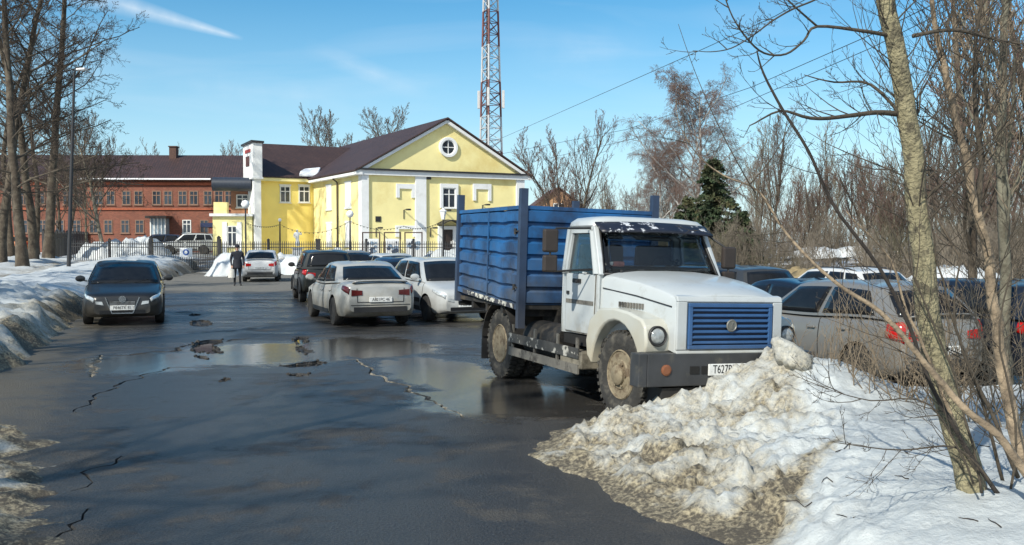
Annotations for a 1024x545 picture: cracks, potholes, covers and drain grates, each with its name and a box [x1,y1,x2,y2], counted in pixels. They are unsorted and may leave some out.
pothole [279,359,327,368]
crack [72,456,121,491]
crack [55,509,88,537]
crack [73,344,249,413]
pothole [190,338,224,354]
